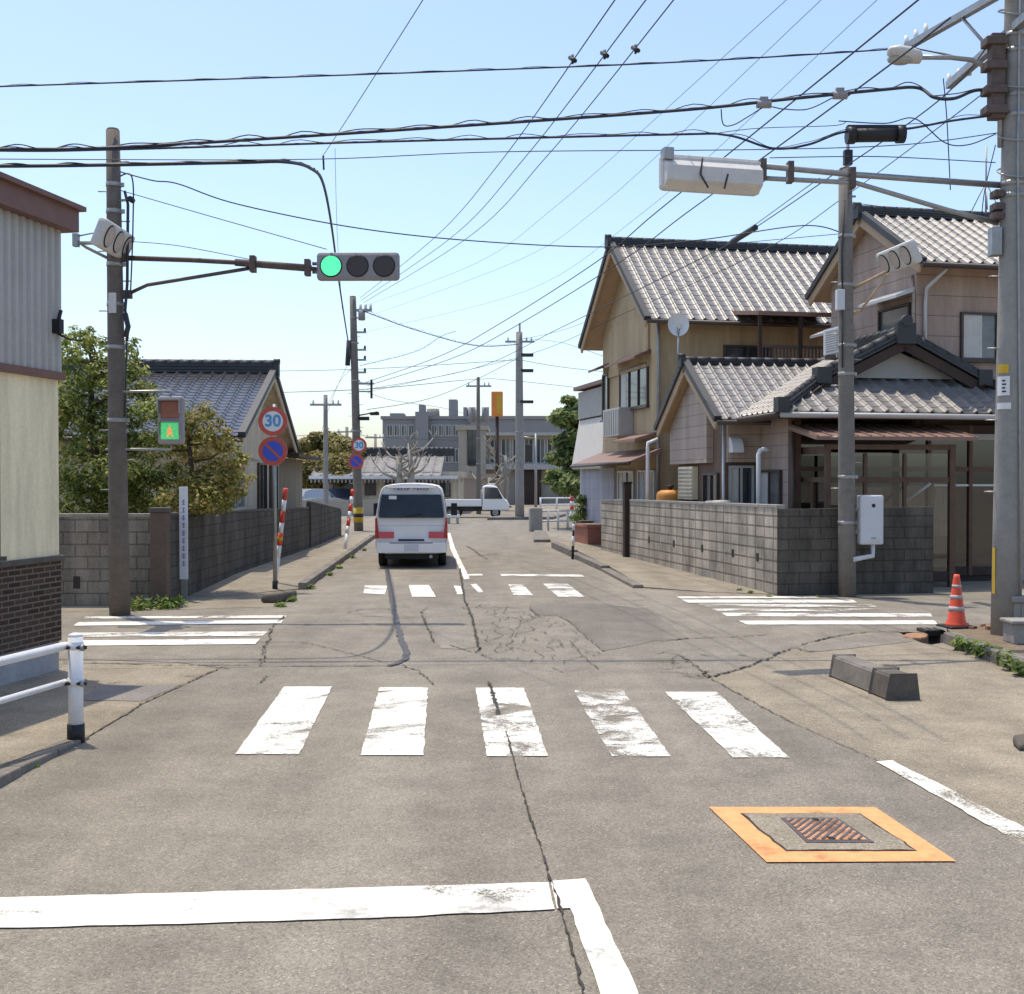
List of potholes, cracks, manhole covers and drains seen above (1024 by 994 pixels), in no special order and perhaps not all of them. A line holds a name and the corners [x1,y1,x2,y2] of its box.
crack [452,546,604,672]
crack [487,681,501,714]
crack [658,631,873,677]
crack [505,731,585,994]
manhole cover [710,807,955,862]
crack [62,615,383,684]
